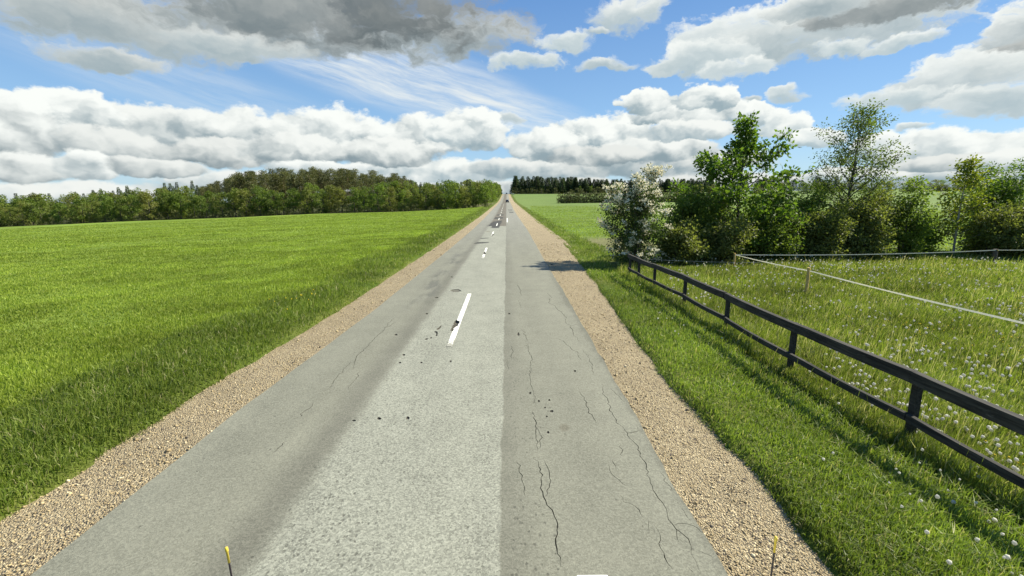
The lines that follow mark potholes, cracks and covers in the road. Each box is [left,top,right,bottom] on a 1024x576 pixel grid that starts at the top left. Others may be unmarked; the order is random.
crack [549,295,712,575]
crack [507,333,561,565]
